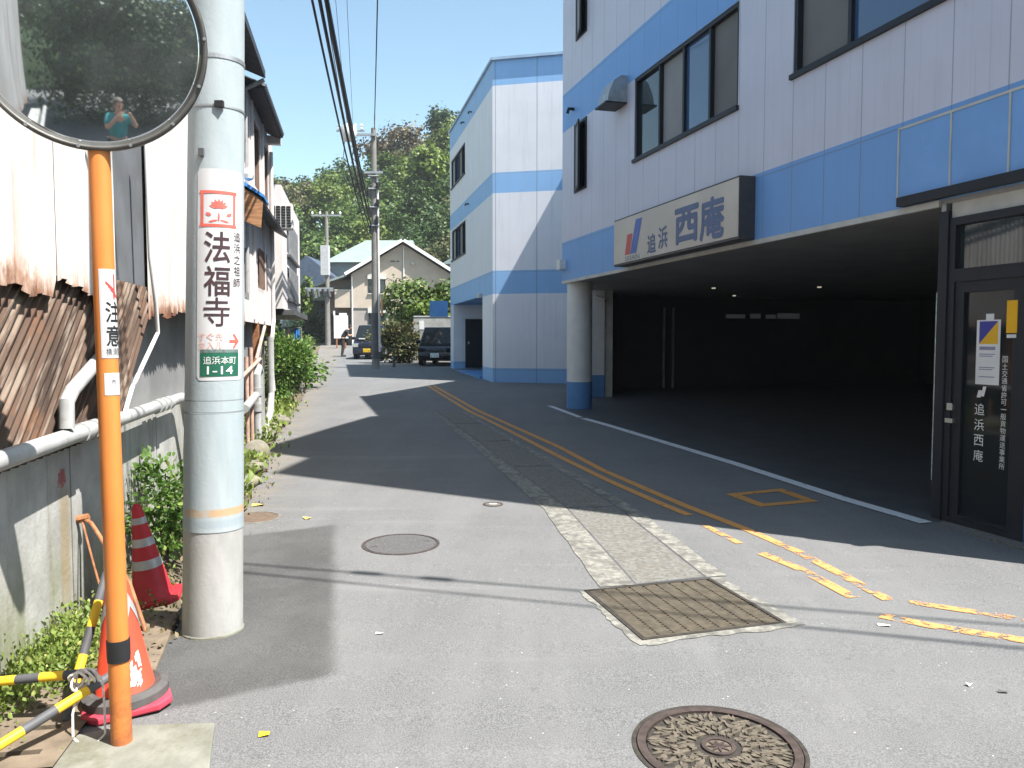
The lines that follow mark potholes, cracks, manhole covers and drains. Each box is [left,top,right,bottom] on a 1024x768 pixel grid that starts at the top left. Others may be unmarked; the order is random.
drain grate [584,578,787,640]
manhole cover [362,534,440,555]
manhole cover [244,511,282,524]
manhole cover [632,705,810,768]
